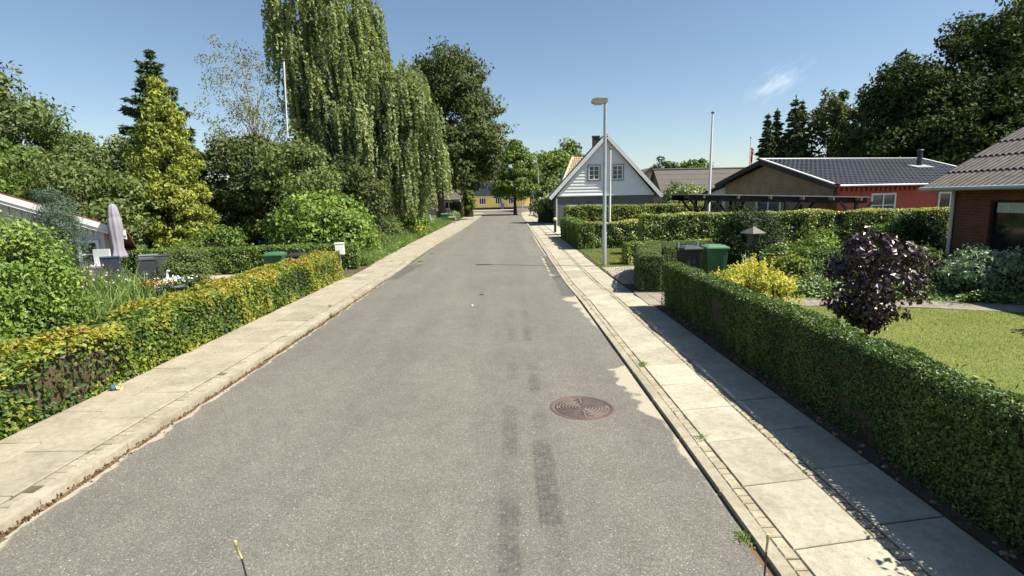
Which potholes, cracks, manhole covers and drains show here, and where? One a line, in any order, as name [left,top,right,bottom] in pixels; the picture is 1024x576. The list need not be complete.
manhole cover [550,396,615,420]
